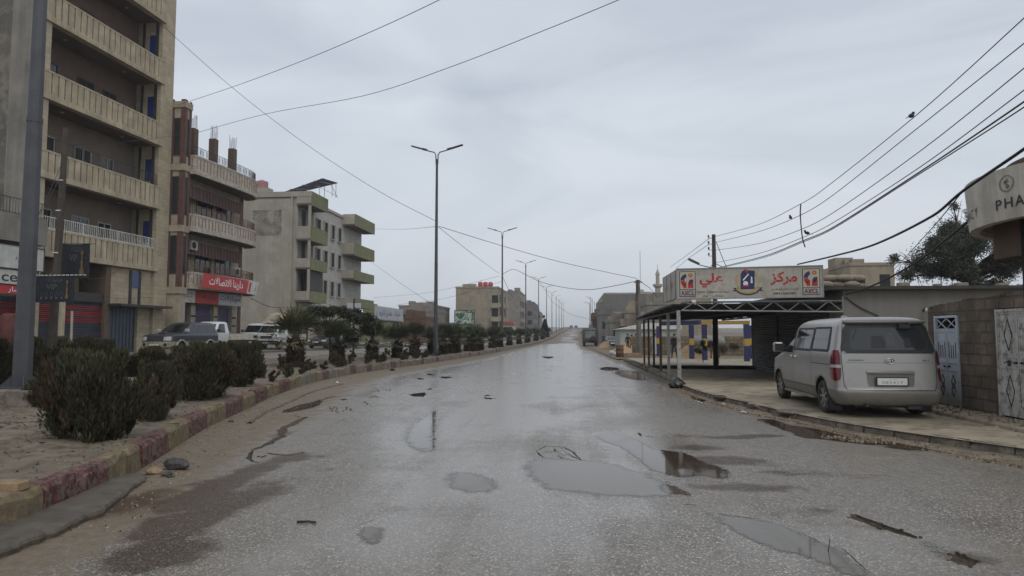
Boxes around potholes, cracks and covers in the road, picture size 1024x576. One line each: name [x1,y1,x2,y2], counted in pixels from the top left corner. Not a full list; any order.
pothole [281,399,322,413]
pothole [947,551,981,568]
pothole [847,514,923,539]
